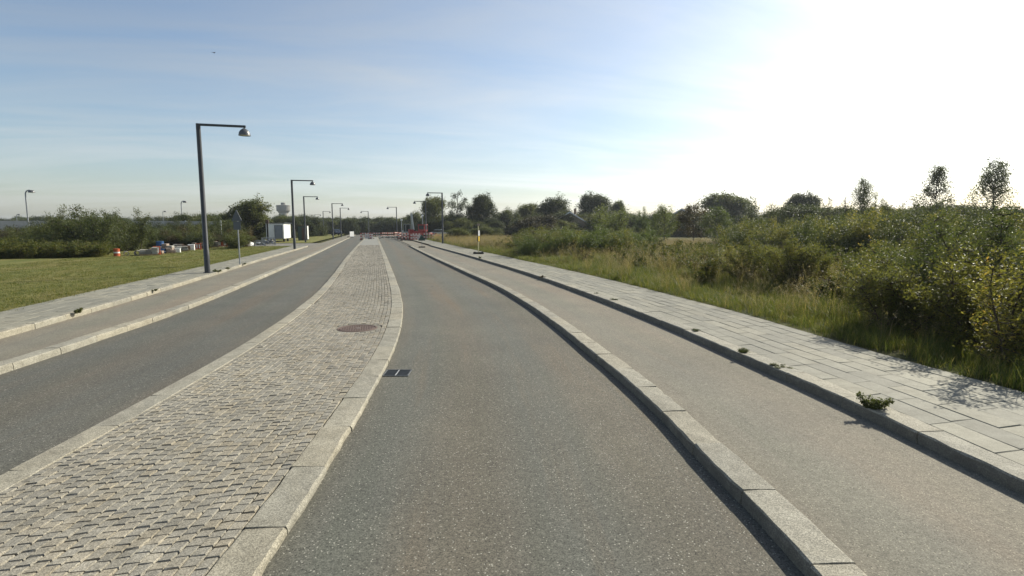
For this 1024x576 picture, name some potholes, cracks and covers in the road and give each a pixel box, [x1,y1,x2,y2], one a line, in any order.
manhole cover [333,324,381,333]
drain grate [382,369,412,377]
